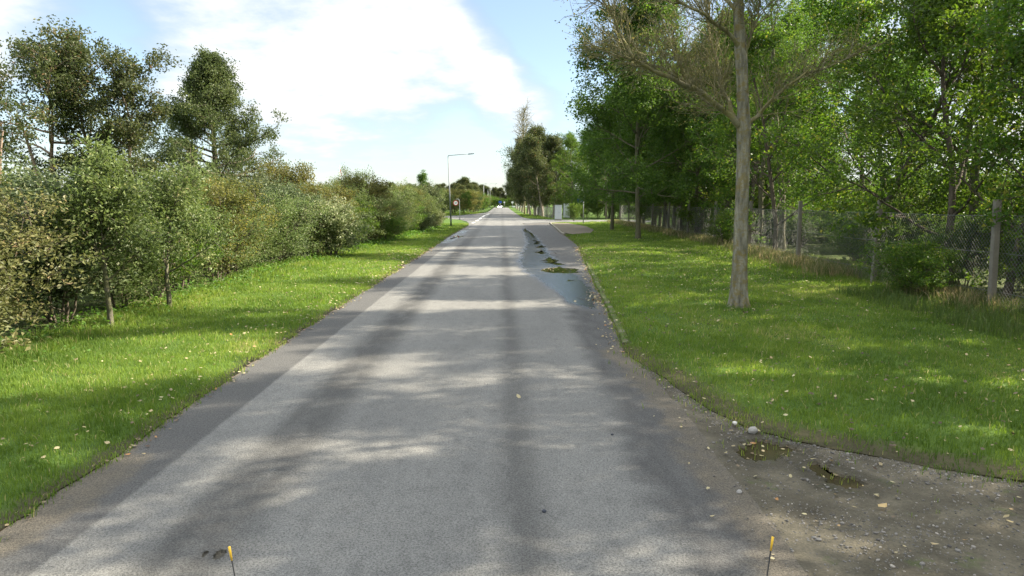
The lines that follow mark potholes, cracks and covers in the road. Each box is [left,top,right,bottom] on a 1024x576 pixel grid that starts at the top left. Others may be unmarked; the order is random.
pothole [806,461,868,489]
pothole [734,438,802,462]
